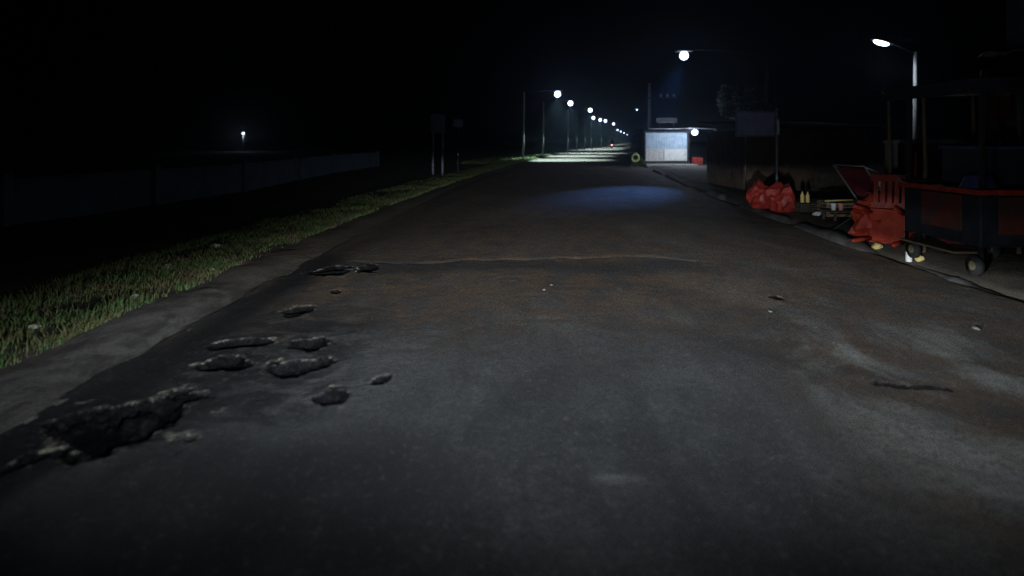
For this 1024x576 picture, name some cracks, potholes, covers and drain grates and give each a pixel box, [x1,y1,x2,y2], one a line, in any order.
pothole [294,264,362,279]
crack [348,254,720,265]
crack [870,381,954,392]
pothole [0,382,233,478]
pothole [352,263,384,274]
pothole [366,372,396,387]
pothole [180,353,262,374]
pothole [237,355,342,381]
pothole [280,336,336,354]
pothole [274,304,324,322]
pothole [200,333,300,352]
pothole [303,382,360,410]
